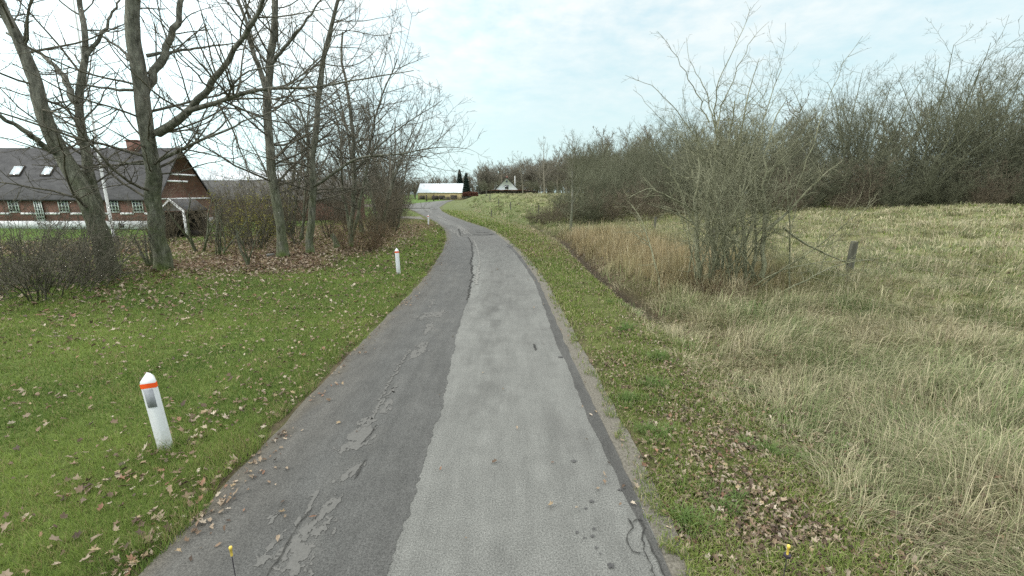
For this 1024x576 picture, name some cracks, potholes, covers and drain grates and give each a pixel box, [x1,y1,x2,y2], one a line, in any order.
crack [626,518,665,576]
